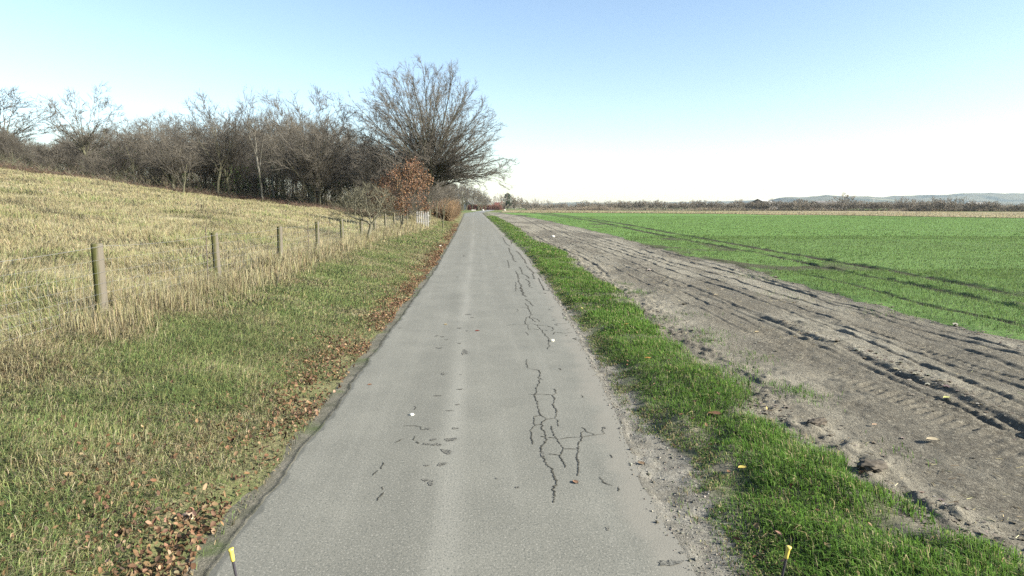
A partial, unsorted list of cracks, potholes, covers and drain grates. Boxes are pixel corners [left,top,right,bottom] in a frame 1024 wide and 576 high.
crack [526,359,605,503]
crack [504,236,577,349]
